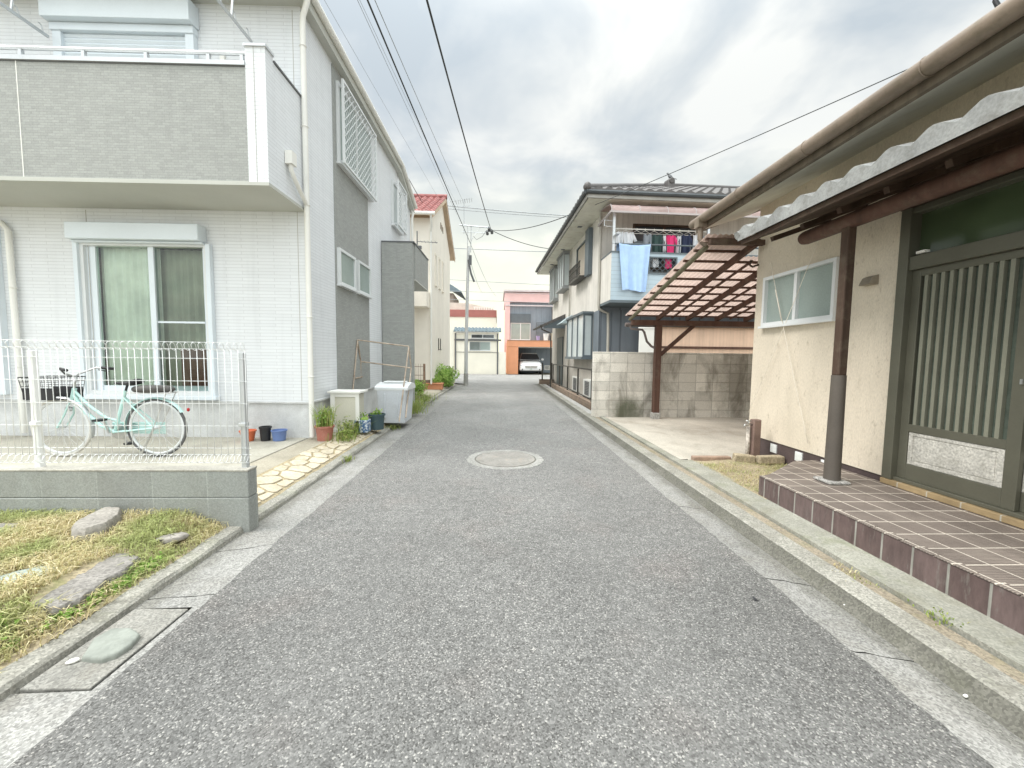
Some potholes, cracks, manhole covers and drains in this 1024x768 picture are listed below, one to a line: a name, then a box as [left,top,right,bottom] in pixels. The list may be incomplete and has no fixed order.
manhole cover [466,450,544,470]
crack [851,650,914,662]
